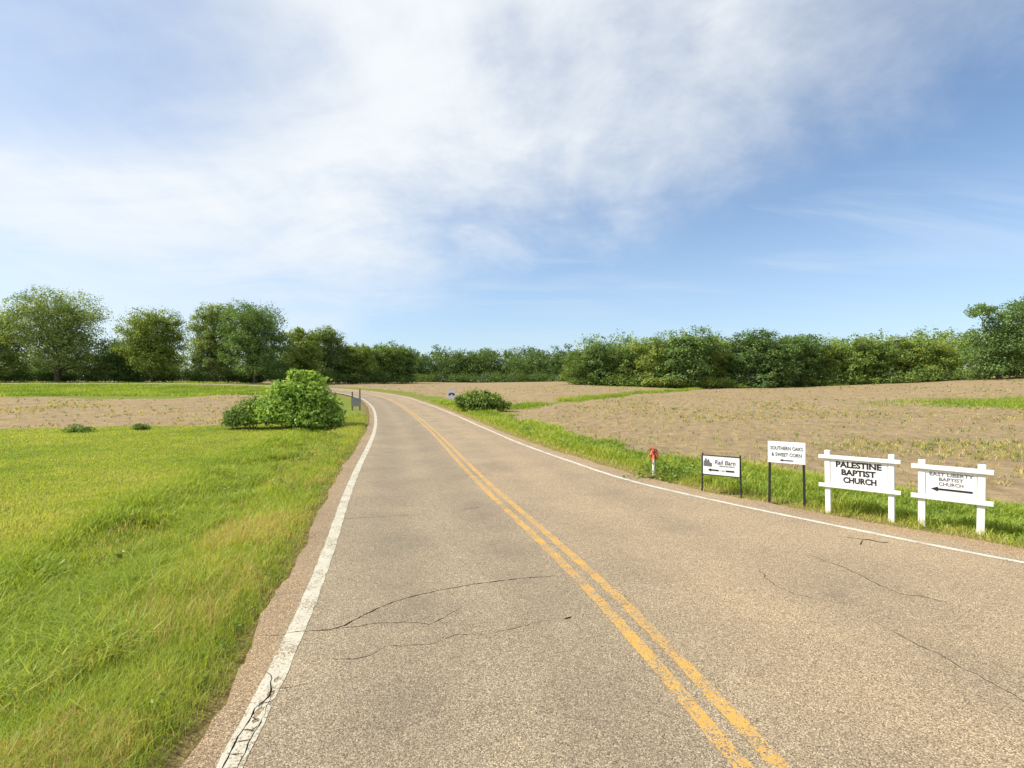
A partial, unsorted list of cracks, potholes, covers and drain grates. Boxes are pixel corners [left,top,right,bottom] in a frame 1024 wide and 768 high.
crack [222,670,310,768]
crack [810,555,941,602]
crack [272,575,571,661]
crack [877,623,1024,702]
